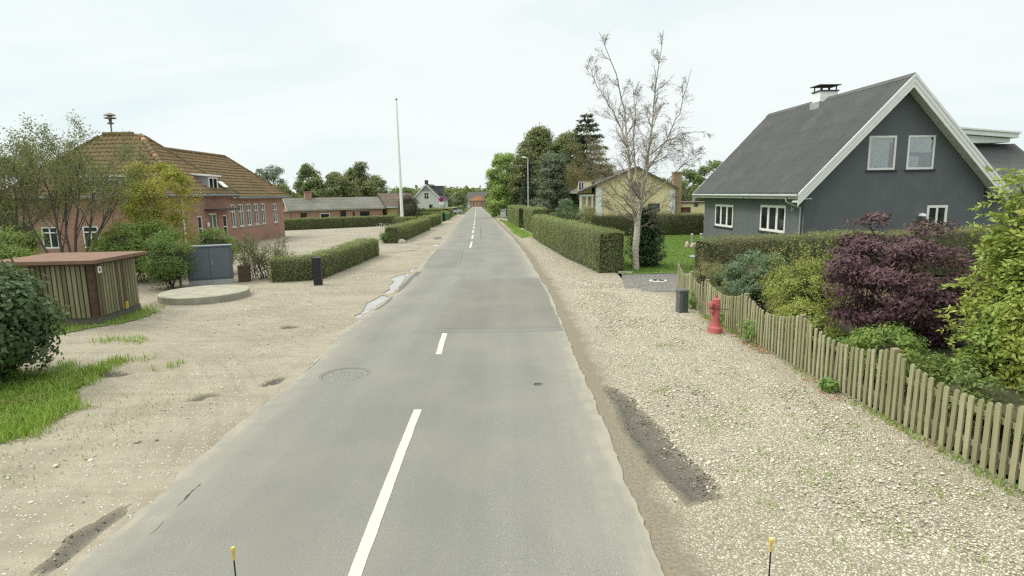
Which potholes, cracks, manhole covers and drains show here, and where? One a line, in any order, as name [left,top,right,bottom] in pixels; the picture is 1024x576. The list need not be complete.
pothole [257,375,288,388]
manhole cover [319,368,371,383]
pothole [179,392,230,403]
